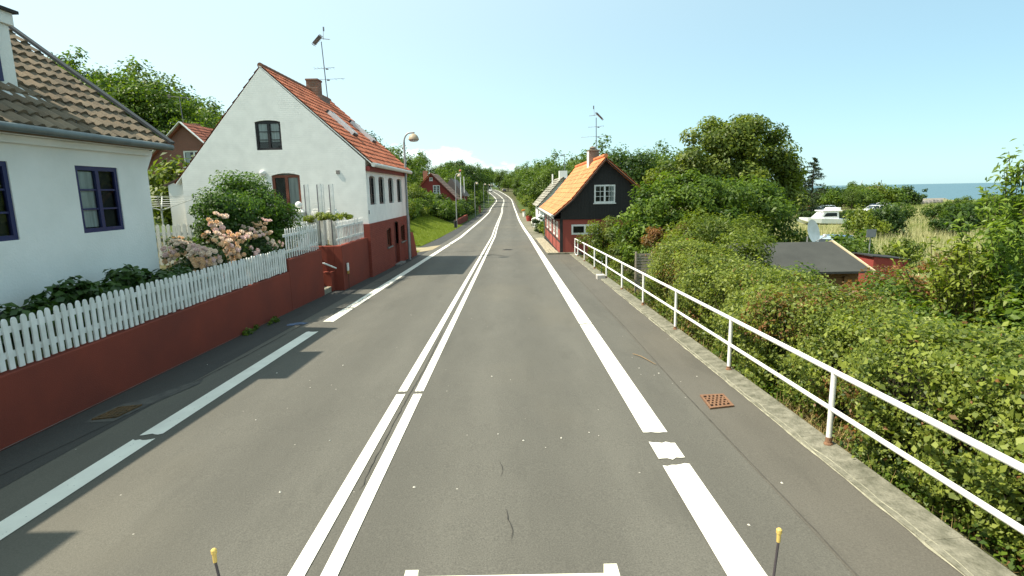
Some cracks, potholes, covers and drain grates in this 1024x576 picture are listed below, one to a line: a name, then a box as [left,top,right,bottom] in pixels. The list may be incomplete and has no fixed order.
drain grate [91,404,142,420]
drain grate [700,394,734,409]
